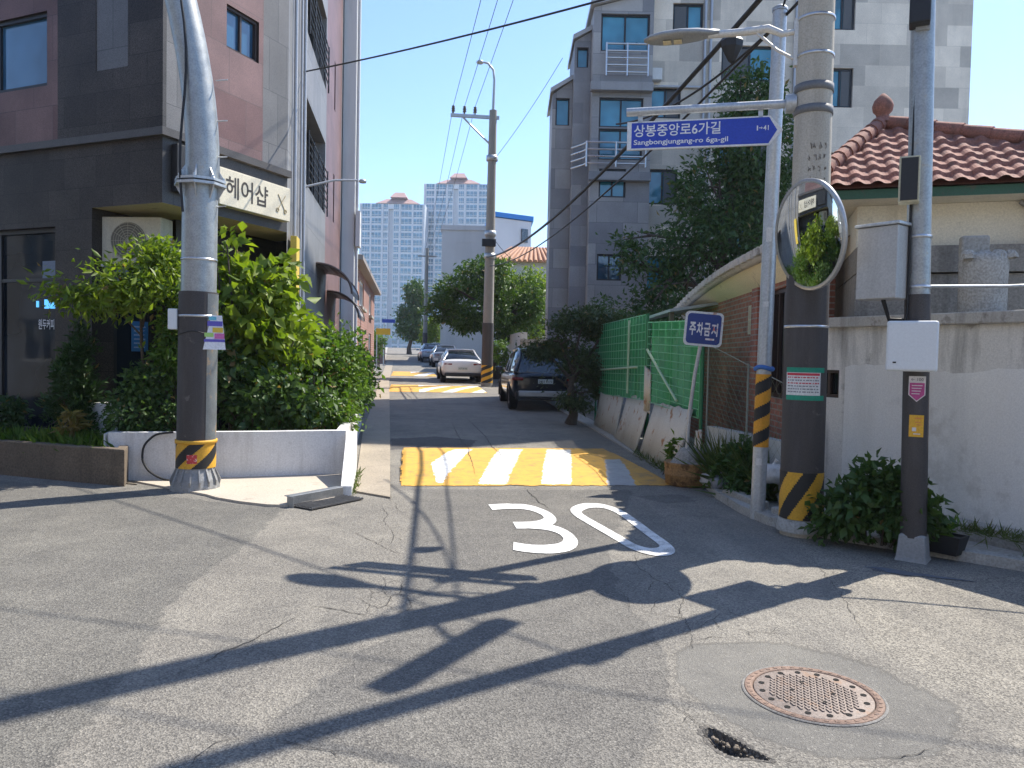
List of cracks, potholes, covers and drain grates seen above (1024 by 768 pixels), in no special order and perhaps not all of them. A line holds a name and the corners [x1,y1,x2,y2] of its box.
crack [170,617,295,678]
drain grate [294,494,364,510]
crack [620,557,789,649]
crack [392,416,507,473]
manhole cover [741,665,889,727]
